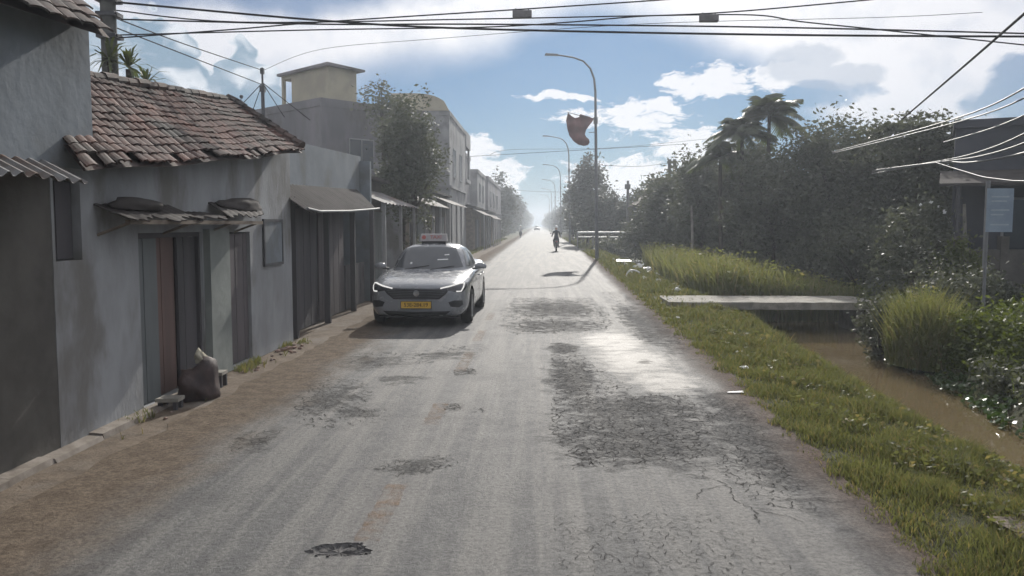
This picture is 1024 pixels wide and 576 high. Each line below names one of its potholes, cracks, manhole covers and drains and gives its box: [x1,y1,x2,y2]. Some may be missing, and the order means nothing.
crack [551,512,792,576]
crack [549,343,817,525]
pothole [304,542,373,557]
